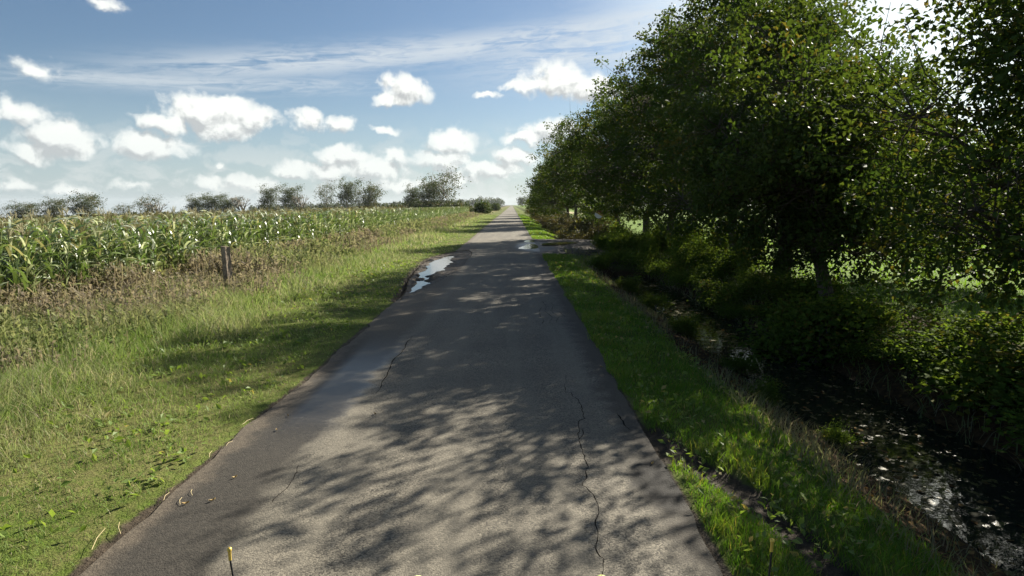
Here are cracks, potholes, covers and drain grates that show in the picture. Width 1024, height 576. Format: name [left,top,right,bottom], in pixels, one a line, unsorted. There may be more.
crack [564,384,604,575]
pothole [400,250,471,300]
